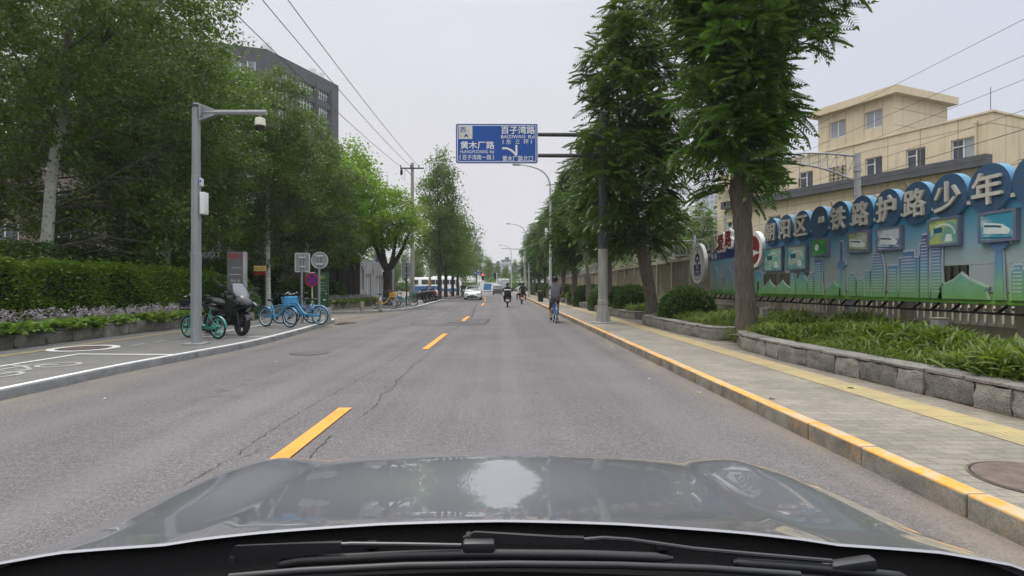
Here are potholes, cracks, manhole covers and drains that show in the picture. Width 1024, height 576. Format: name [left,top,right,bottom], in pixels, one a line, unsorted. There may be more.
crack [185,326,459,486]
manhole cover [965,461,1024,492]
